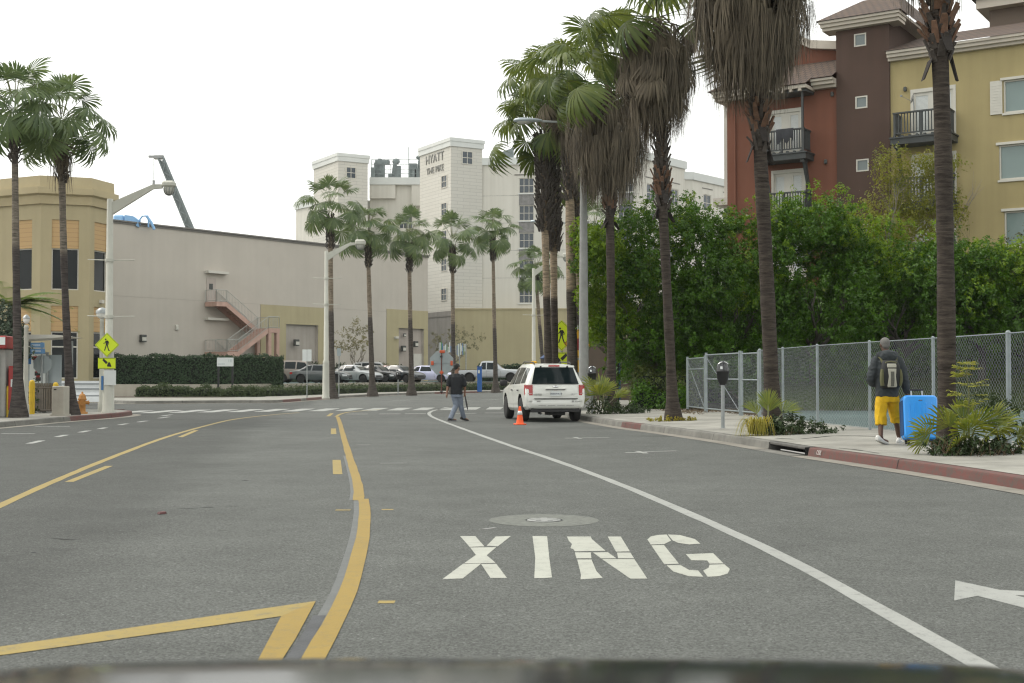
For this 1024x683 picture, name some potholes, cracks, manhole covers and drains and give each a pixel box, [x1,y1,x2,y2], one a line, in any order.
manhole cover [489,514,599,527]
drain grate [754,441,836,456]
